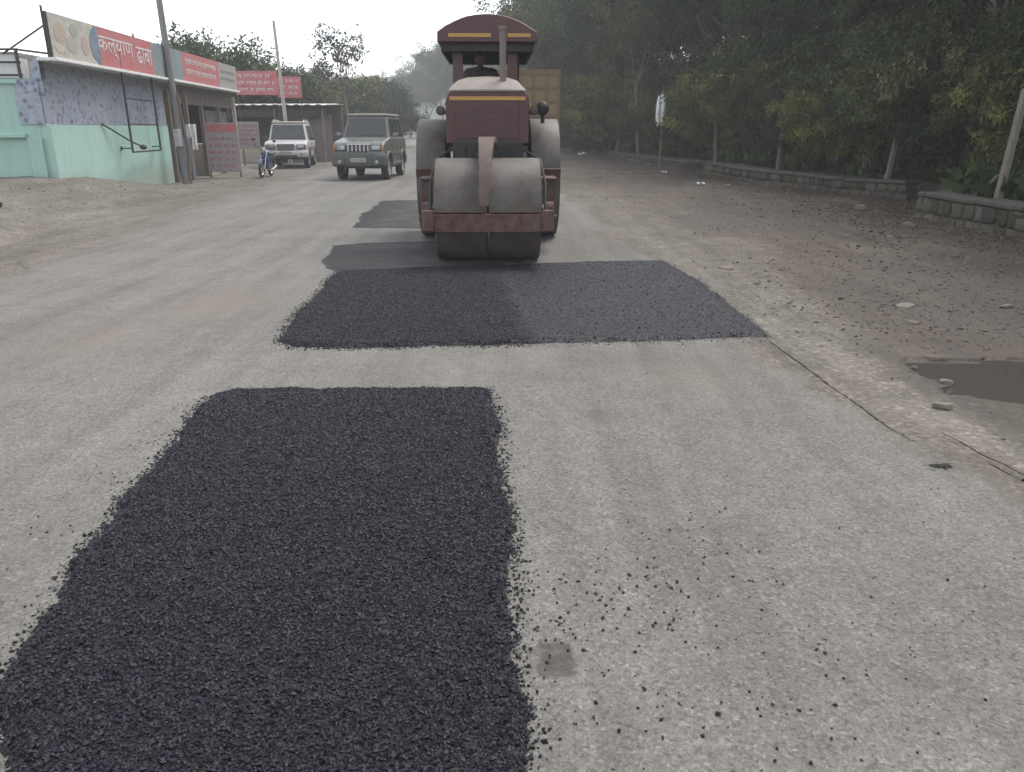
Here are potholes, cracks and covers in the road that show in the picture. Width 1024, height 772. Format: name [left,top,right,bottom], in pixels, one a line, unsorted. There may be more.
pothole [863,351,1024,413]
